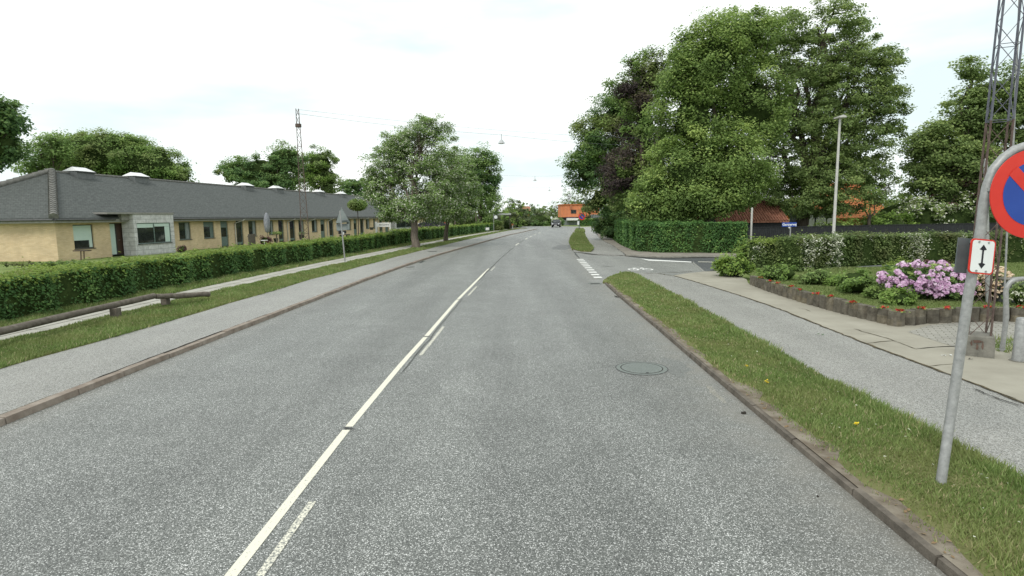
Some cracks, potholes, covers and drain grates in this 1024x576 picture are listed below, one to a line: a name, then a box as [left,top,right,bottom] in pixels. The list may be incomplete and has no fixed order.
manhole cover [615,361,669,375]
